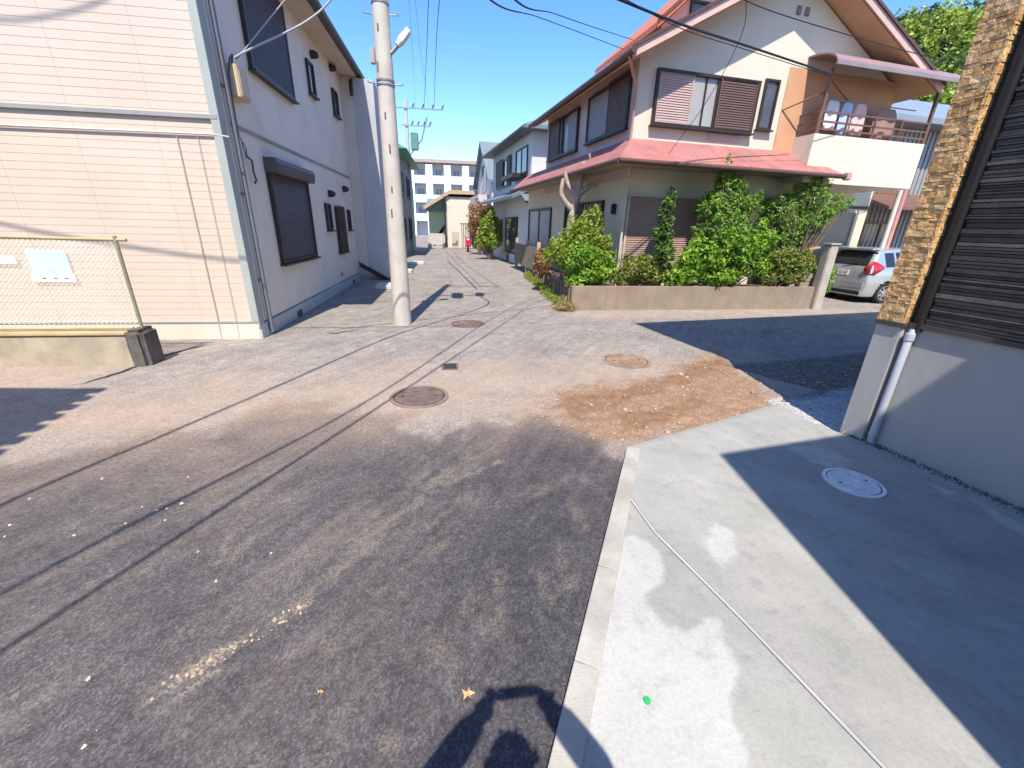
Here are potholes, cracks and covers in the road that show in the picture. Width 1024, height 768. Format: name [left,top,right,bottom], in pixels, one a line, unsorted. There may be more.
manhole cover [822,468,887,499]
manhole cover [450,320,484,328]
manhole cover [390,386,449,409]
manhole cover [602,353,652,369]
